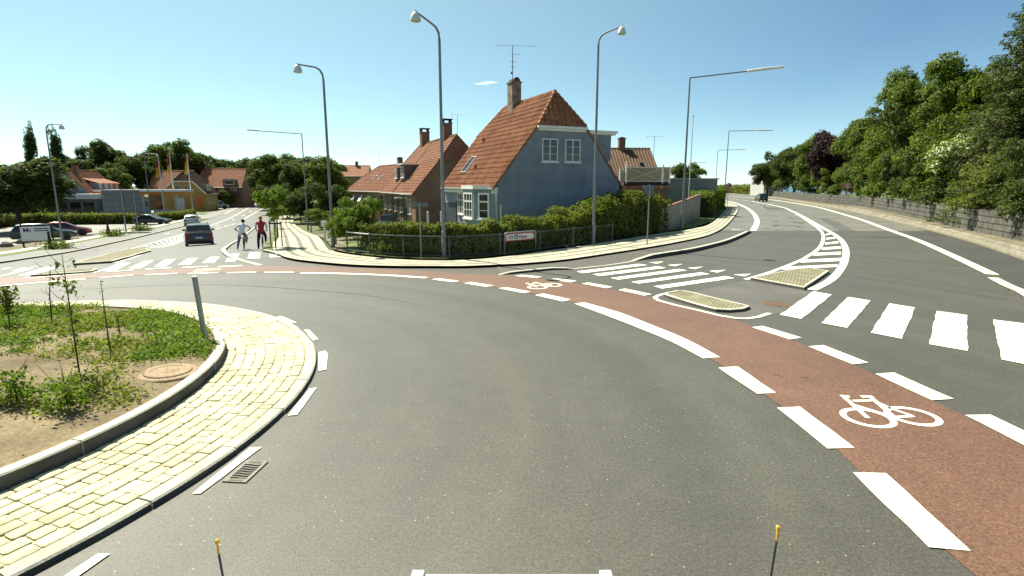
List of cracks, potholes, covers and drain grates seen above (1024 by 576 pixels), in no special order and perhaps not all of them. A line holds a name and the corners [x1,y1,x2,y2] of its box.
drain grate [222,460,268,484]
manhole cover [138,363,199,383]
